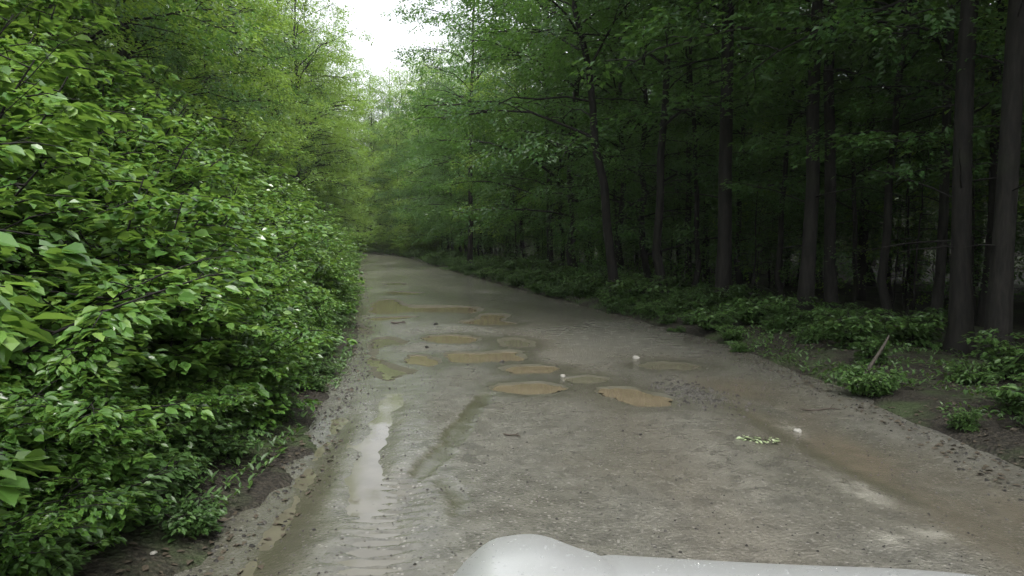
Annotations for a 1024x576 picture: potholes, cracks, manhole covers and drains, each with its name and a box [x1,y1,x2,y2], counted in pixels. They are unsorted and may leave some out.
pothole [459,313,516,325]
pothole [497,337,536,347]
pothole [368,298,485,314]
pothole [561,374,611,384]
pothole [637,361,702,370]
pothole [367,336,419,381]
pothole [498,364,560,374]
pothole [420,334,482,343]
pothole [442,349,528,363]
pothole [403,354,443,367]
pothole [594,386,678,407]
pothole [489,381,569,395]
